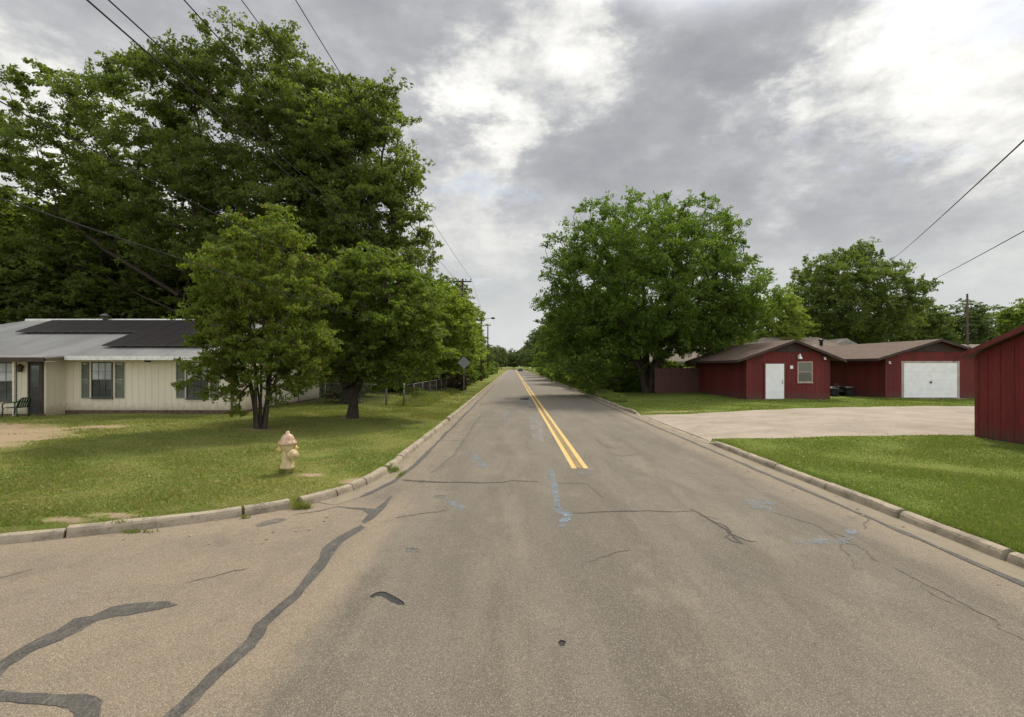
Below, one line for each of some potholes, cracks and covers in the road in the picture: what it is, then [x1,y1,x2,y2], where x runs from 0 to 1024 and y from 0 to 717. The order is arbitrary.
crack [573,482,756,544]
crack [894,567,1024,640]
